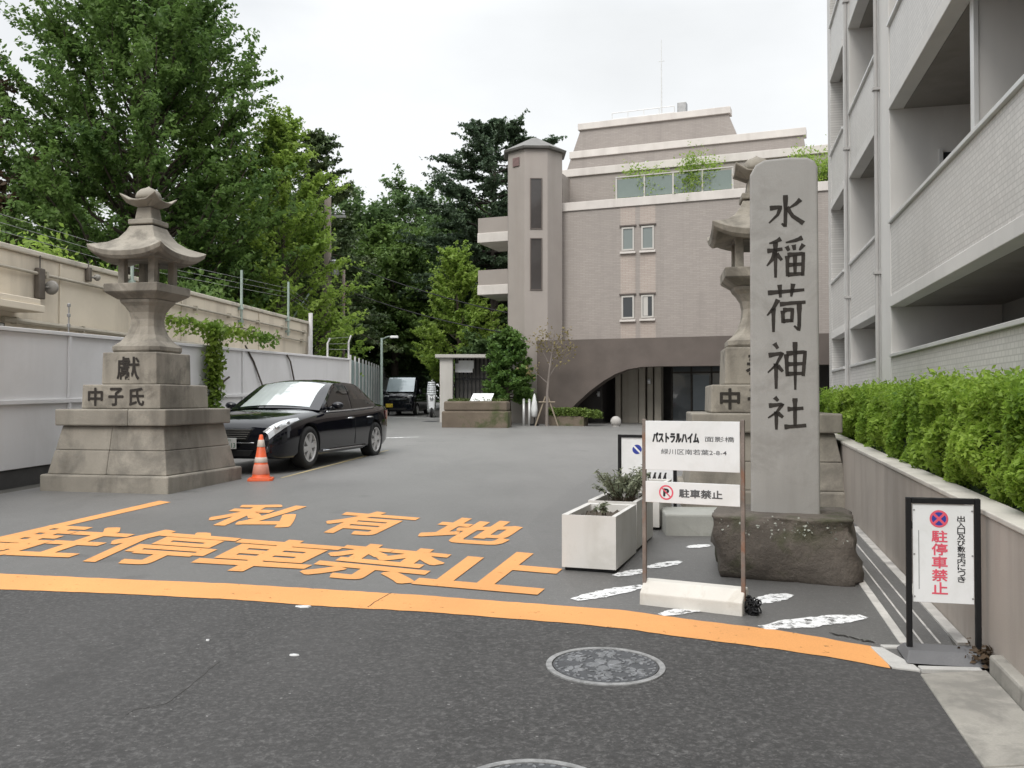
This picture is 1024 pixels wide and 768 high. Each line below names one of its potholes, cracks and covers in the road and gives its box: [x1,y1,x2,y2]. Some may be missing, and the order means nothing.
manhole cover [477,759,586,768]
manhole cover [546,647,666,686]
